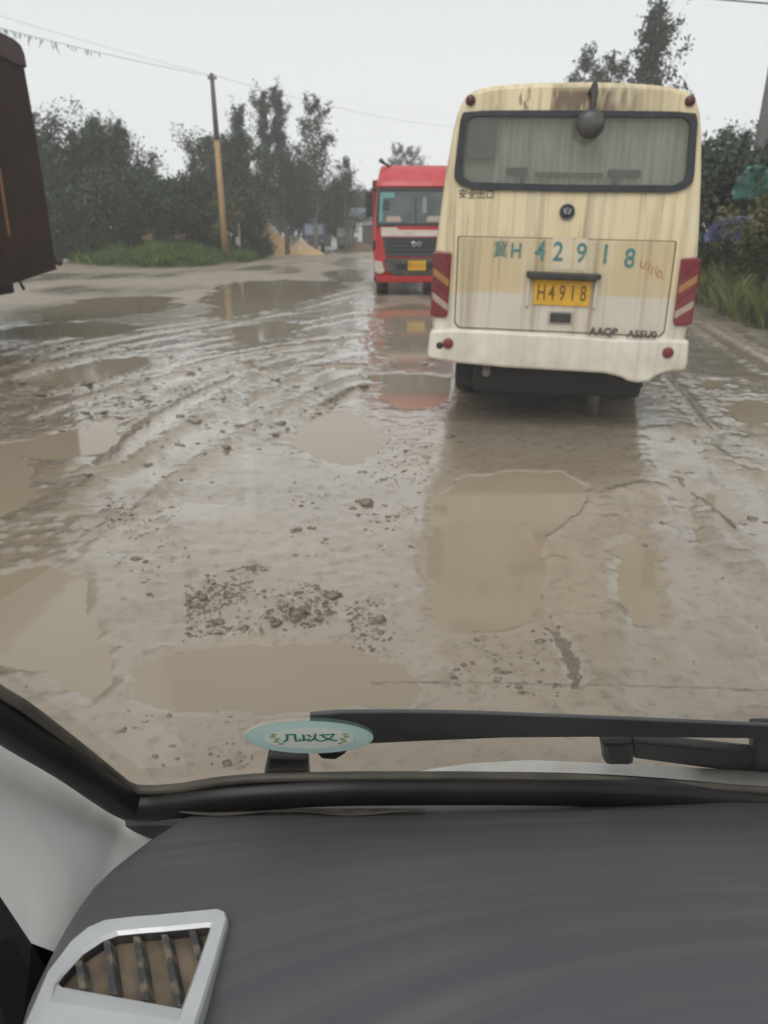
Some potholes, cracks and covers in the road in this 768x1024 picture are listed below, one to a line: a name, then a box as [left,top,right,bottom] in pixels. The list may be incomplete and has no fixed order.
pothole [165,279,360,320]
pothole [19,296,180,326]
pothole [0,566,152,700]
pothole [610,538,664,626]
pothole [0,423,122,460]
pothole [291,412,393,466]
pothole [0,322,143,341]
pothole [421,471,586,632]
pothole [135,643,423,714]
crack [534,507,582,688]
pothole [0,454,44,518]
